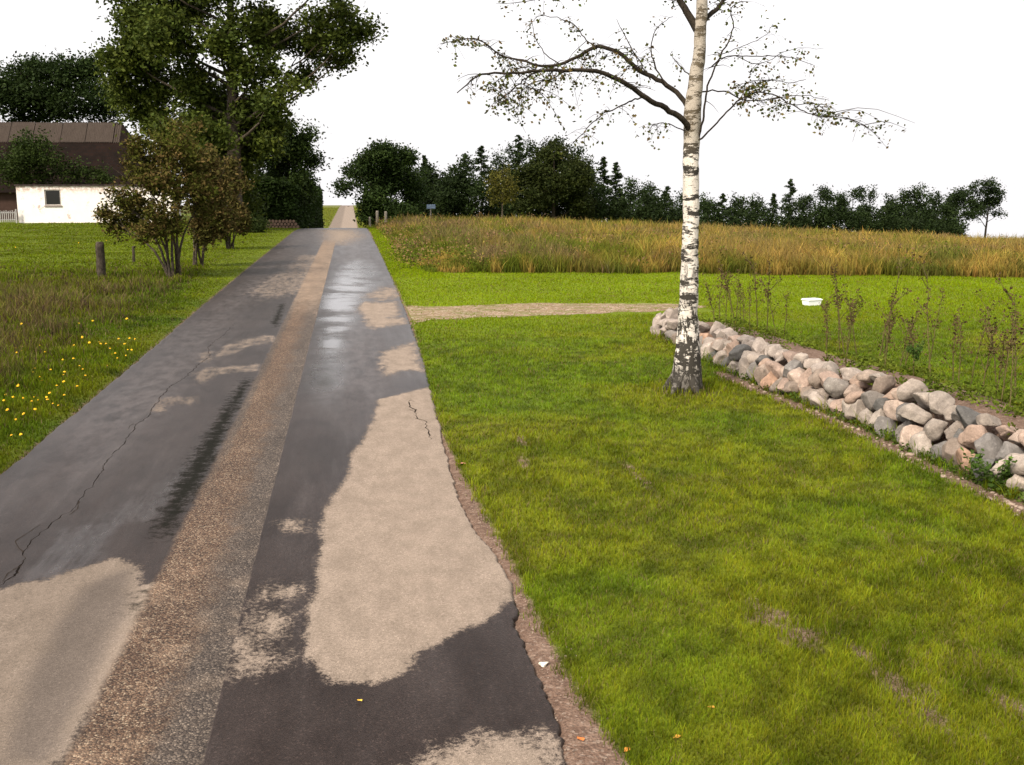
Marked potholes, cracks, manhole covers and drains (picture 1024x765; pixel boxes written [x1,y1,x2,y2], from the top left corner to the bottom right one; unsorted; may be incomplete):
crack [2,326,232,585]
